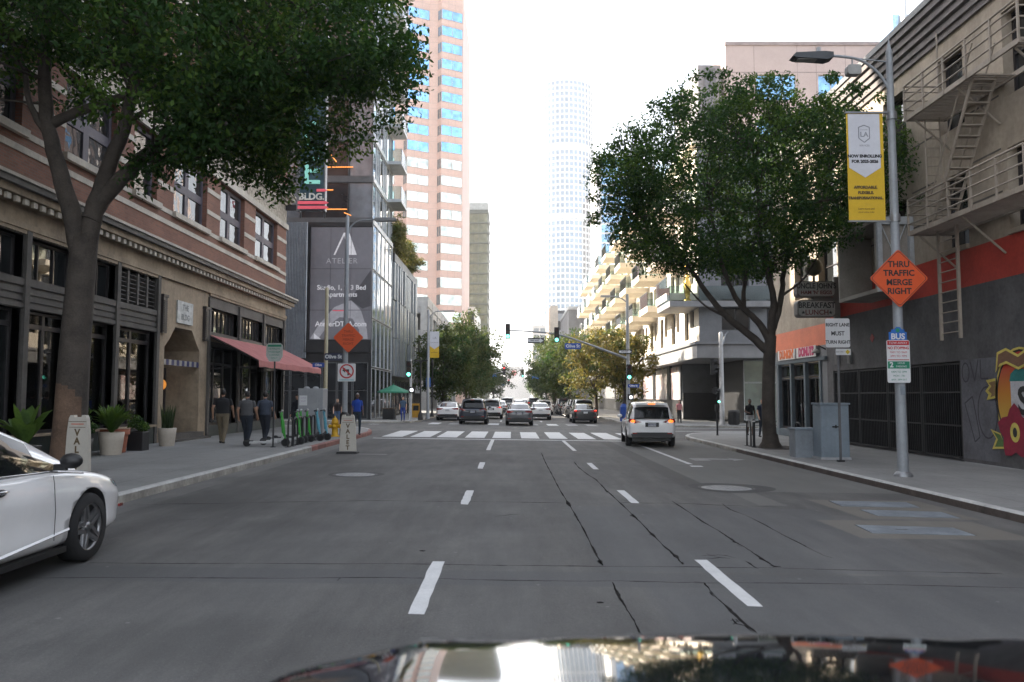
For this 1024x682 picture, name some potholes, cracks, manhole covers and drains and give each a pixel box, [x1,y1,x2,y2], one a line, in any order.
manhole cover [688,483,776,493]
crack [70,455,1015,633]
